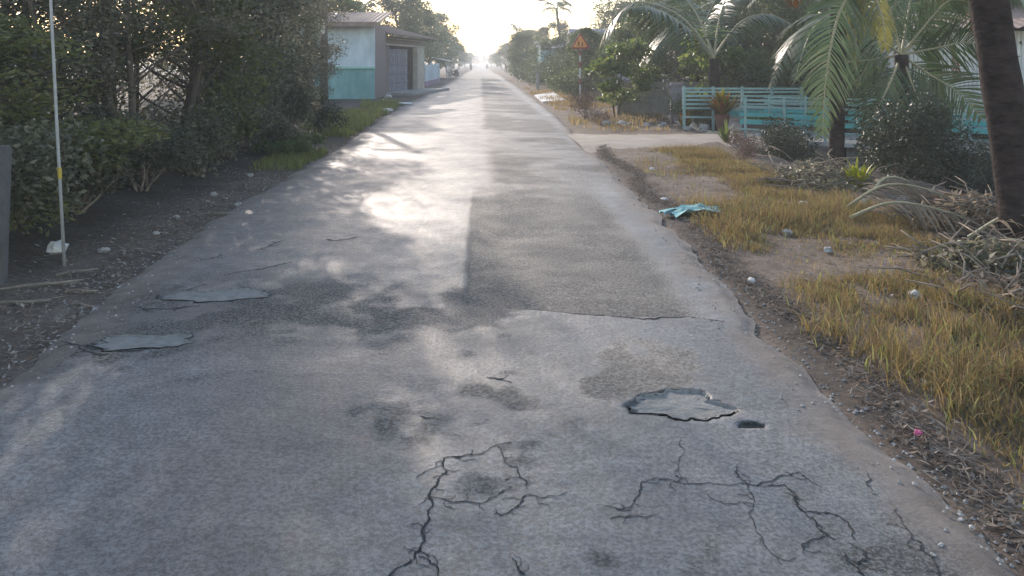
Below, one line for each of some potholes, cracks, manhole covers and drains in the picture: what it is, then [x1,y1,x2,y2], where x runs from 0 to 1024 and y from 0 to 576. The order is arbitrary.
pothole [626,388,738,421]
crack [886,507,940,576]
crack [605,441,884,576]
crack [388,442,566,576]
crack [196,240,291,276]
